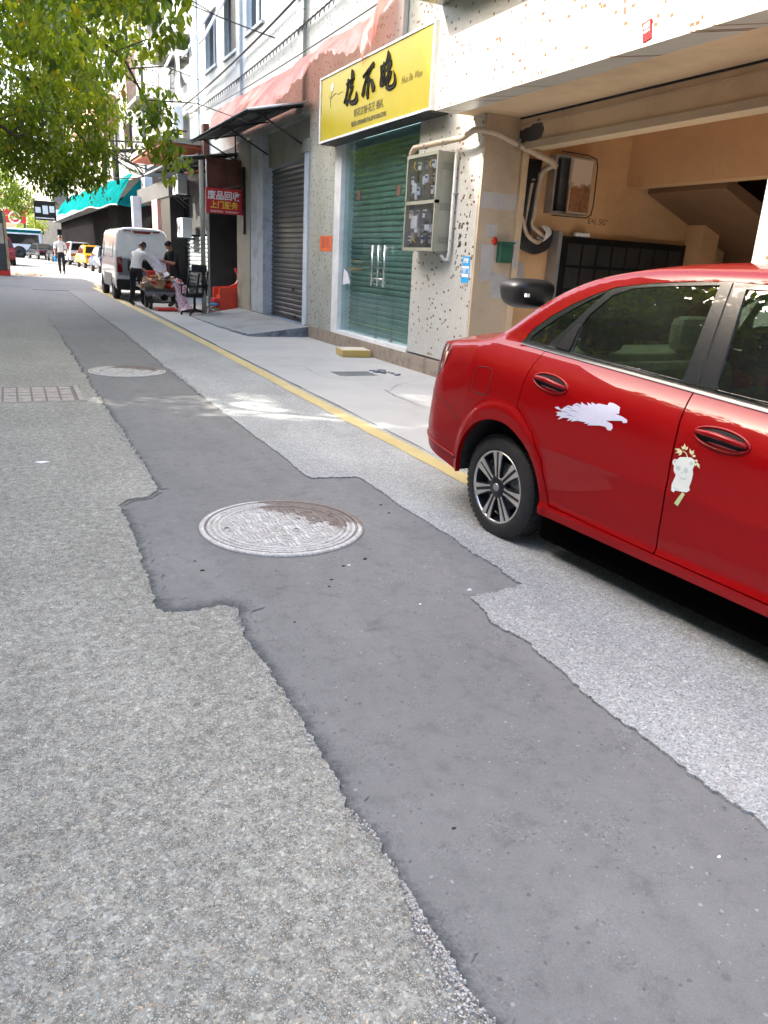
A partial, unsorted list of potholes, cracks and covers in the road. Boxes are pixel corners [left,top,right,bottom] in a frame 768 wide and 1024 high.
manhole cover [197,500,365,558]
manhole cover [87,365,167,377]
drain grate [0,385,87,403]
